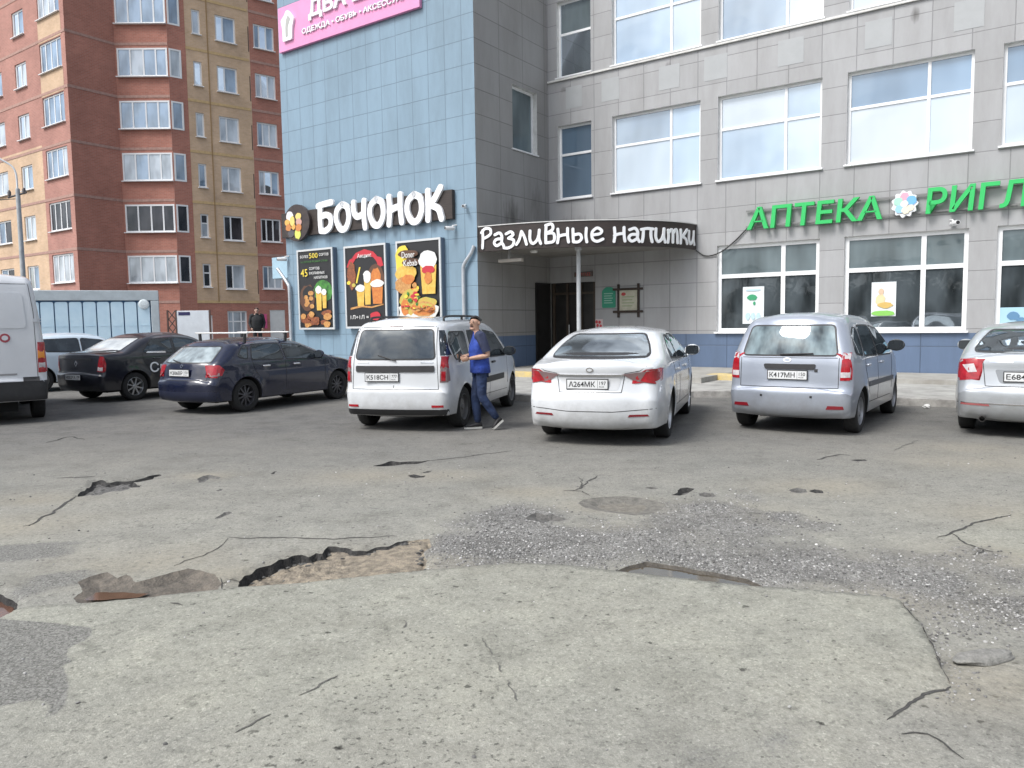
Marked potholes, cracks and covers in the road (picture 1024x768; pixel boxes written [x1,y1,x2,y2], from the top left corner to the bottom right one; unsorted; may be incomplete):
crack [174,535,391,566]
pothole [238,539,431,587]
crack [887,601,964,759]
pothole [618,562,762,586]
crack [938,515,1010,555]
pothole [0,594,18,617]
crack [26,497,75,526]
pothole [78,474,162,497]
crack [482,638,518,700]
pothole [73,568,223,603]
